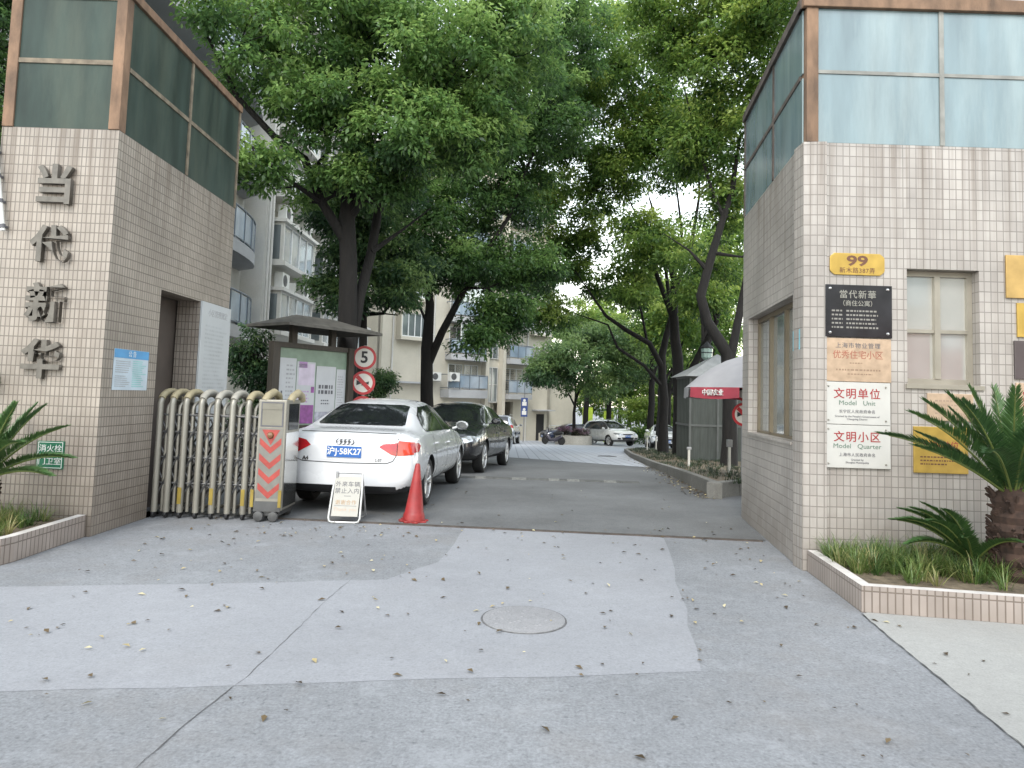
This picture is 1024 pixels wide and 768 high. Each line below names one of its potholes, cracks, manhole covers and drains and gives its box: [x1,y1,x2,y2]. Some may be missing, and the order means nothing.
manhole cover [481,606,567,634]
